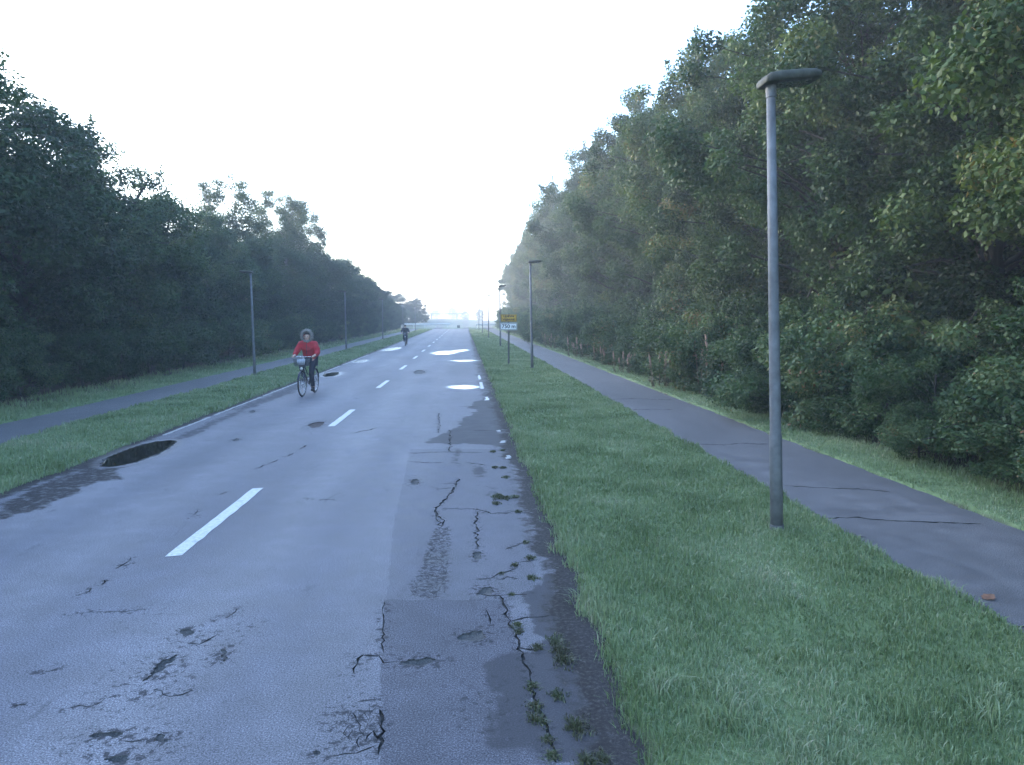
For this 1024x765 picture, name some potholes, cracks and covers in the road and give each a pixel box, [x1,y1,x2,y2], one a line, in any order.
crack [829,517,978,537]
crack [412,414,532,598]
crack [331,699,386,757]
crack [352,655,397,673]
crack [481,541,556,763]
